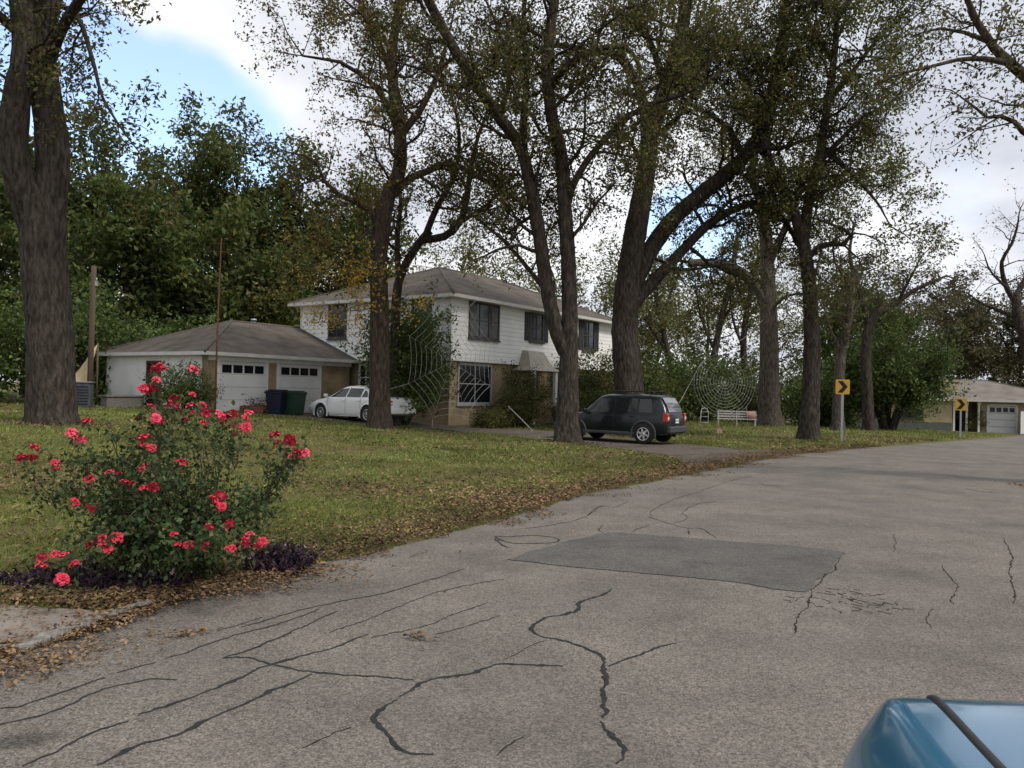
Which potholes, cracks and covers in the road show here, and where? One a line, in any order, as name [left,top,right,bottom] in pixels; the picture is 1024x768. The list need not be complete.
crack [634,476,775,538]
crack [1004,540,1017,603]
crack [494,501,628,548]
crack [772,553,906,635]
crack [0,569,677,766]
